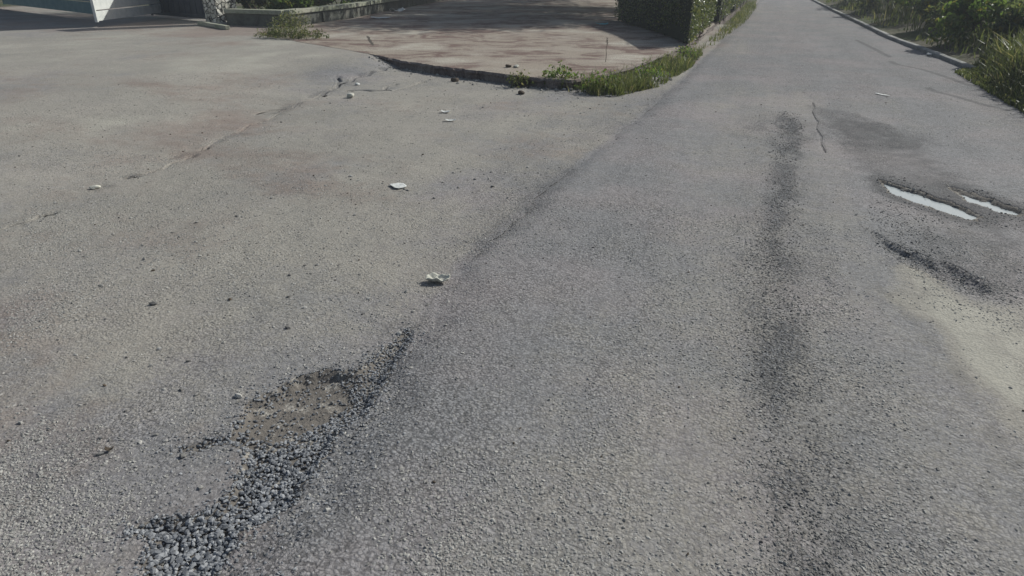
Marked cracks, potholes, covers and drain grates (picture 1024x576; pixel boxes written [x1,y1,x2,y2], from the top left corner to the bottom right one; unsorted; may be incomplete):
crack [811,103,826,152]
pothole [66,322,441,576]
pothole [947,185,1024,217]
pothole [865,179,991,222]
crack [317,67,424,97]
pothole [871,232,1019,296]
